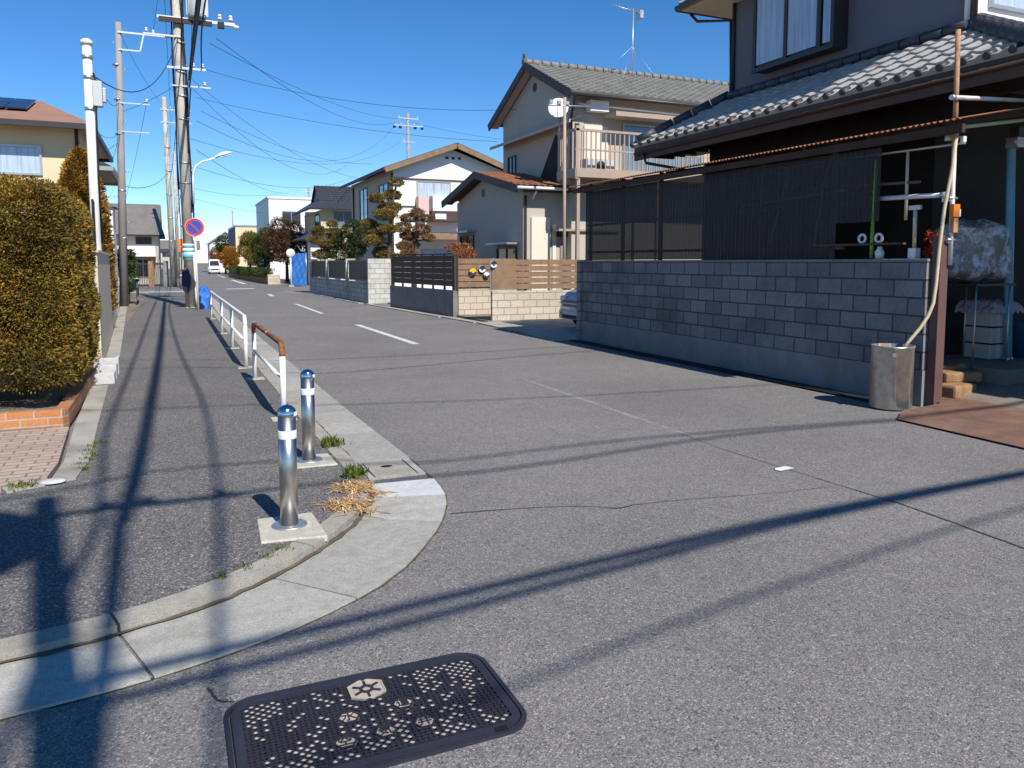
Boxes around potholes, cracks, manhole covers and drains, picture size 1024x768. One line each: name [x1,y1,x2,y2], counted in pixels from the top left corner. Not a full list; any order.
crack [450,486,830,514]
crack [207,687,234,702]
manhole cover [224,652,527,768]
